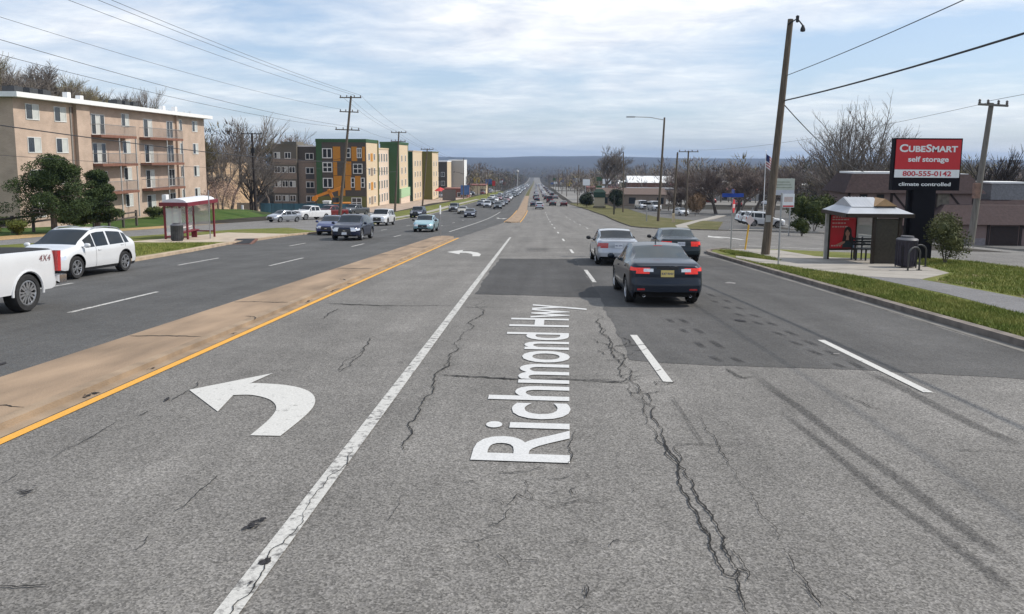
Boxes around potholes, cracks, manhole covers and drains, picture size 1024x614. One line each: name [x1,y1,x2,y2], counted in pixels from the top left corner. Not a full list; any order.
crack [402,301,823,612]
